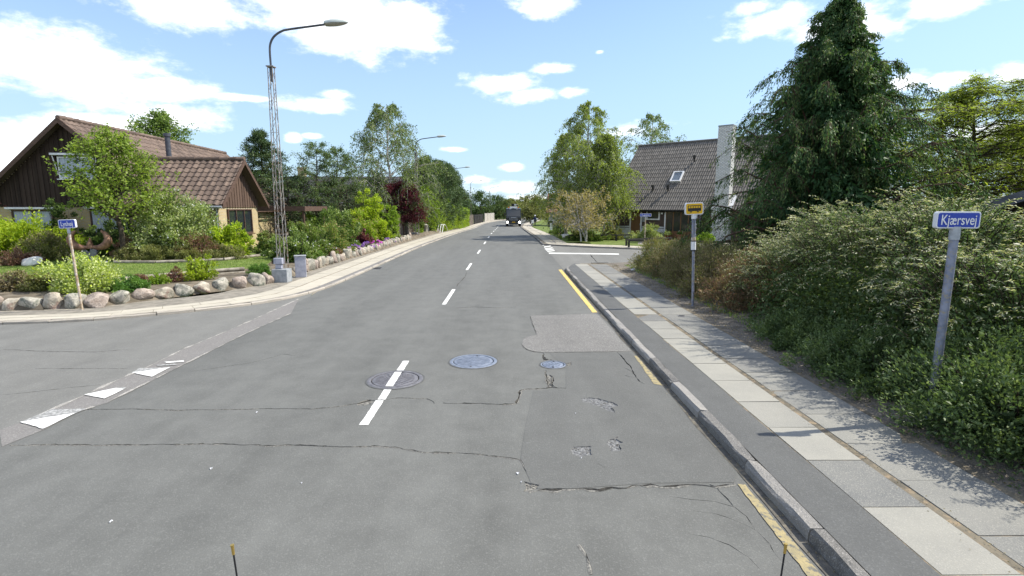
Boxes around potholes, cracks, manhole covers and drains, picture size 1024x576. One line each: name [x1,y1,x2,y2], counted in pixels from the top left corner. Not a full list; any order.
pothole [607,437,623,451]
crack [86,353,570,411]
pothole [571,446,592,457]
manhole cover [365,370,425,389]
manhole cover [539,360,567,369]
crack [10,443,777,567]
crack [577,545,593,575]
pothole [581,398,618,412]
manhole cover [448,354,499,369]
crack [4,349,127,395]
